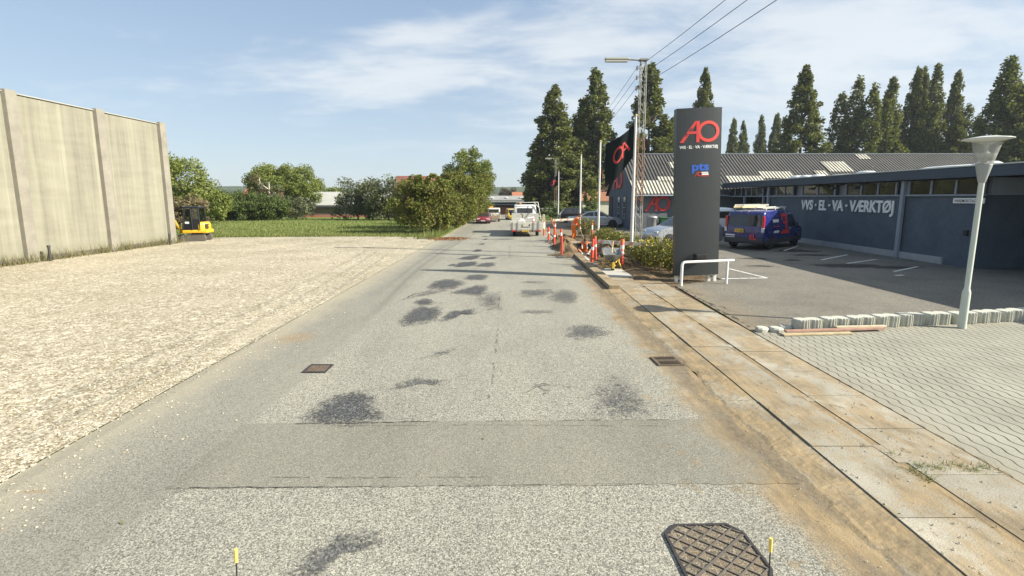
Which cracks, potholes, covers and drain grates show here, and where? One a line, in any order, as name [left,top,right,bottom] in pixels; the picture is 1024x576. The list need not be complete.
manhole cover [302,364,334,373]
drain grate [650,356,685,366]
